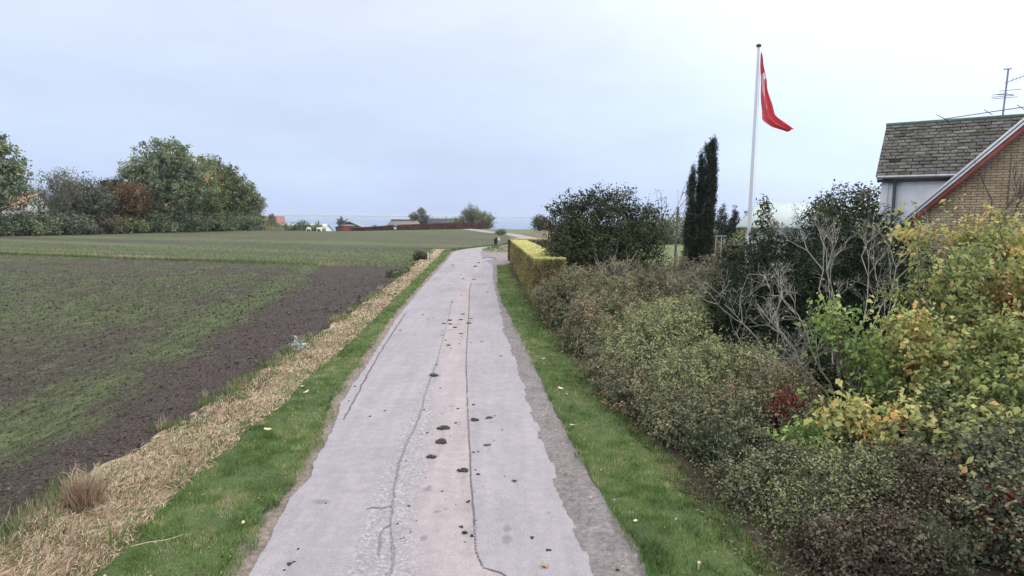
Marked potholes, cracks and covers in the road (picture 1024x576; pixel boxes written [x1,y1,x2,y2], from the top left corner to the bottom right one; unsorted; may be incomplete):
crack [344,285,506,576]
